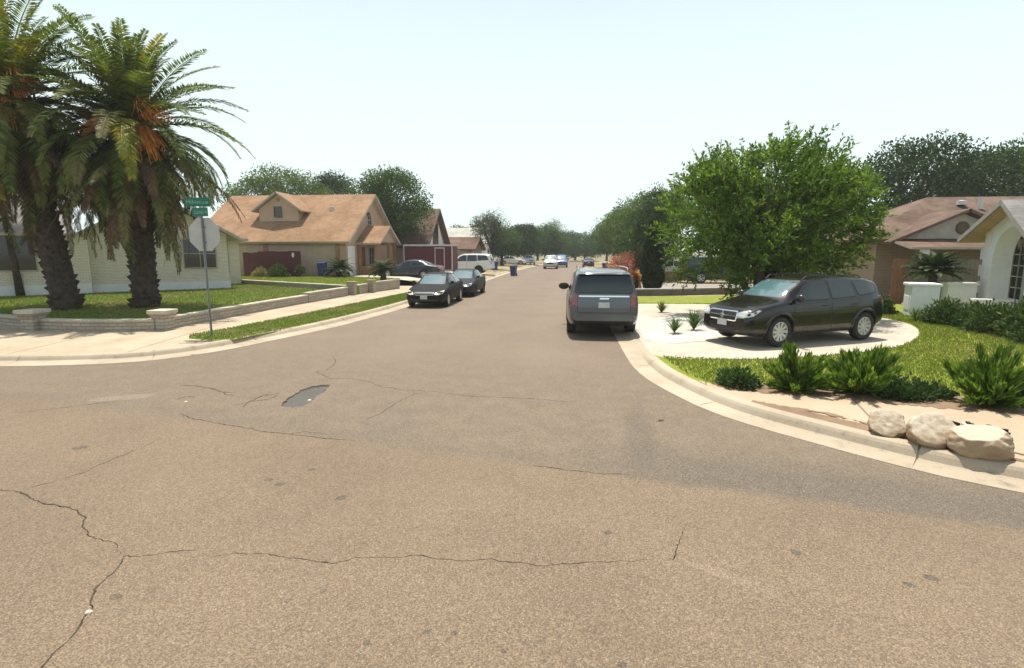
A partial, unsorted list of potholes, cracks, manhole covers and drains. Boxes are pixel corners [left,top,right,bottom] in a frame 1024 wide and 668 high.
pothole [281,385,330,408]
crack [214,553,650,569]
crack [178,385,279,407]
crack [317,357,566,419]
crack [0,439,194,668]
